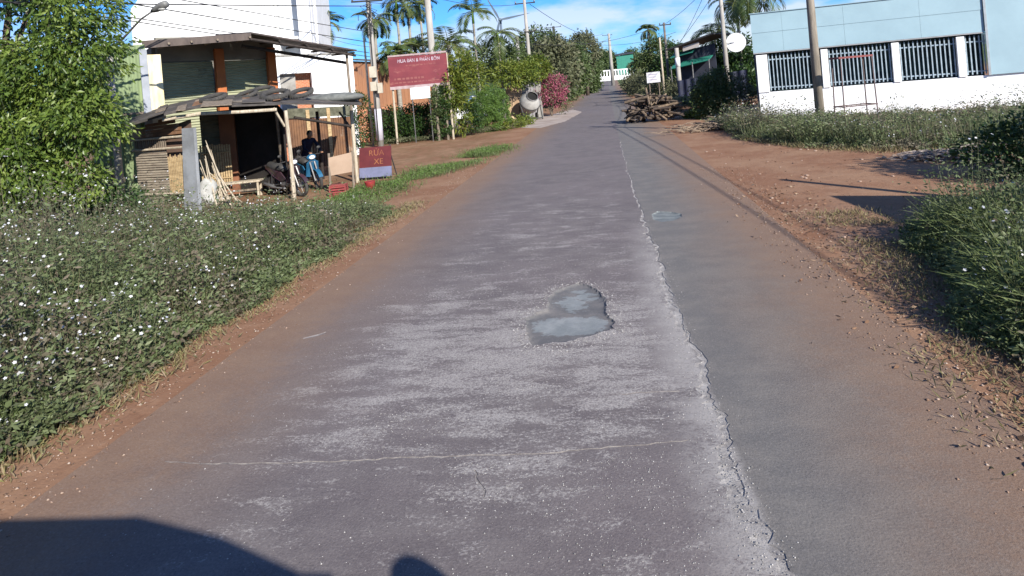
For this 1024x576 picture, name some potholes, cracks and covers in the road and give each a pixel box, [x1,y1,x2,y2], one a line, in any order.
crack [165,142,798,576]
pothole [652,211,682,222]
pothole [525,282,615,346]
